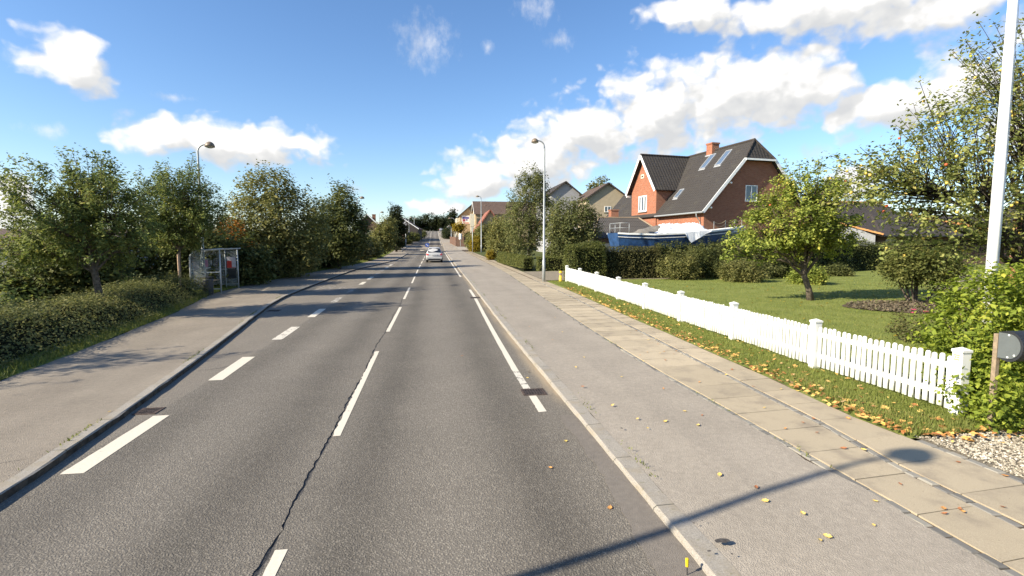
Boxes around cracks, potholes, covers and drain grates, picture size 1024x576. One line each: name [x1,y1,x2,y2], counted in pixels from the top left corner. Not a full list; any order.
drain grate [520,388,547,396]
drain grate [132,407,166,415]
crack [252,277,414,576]
